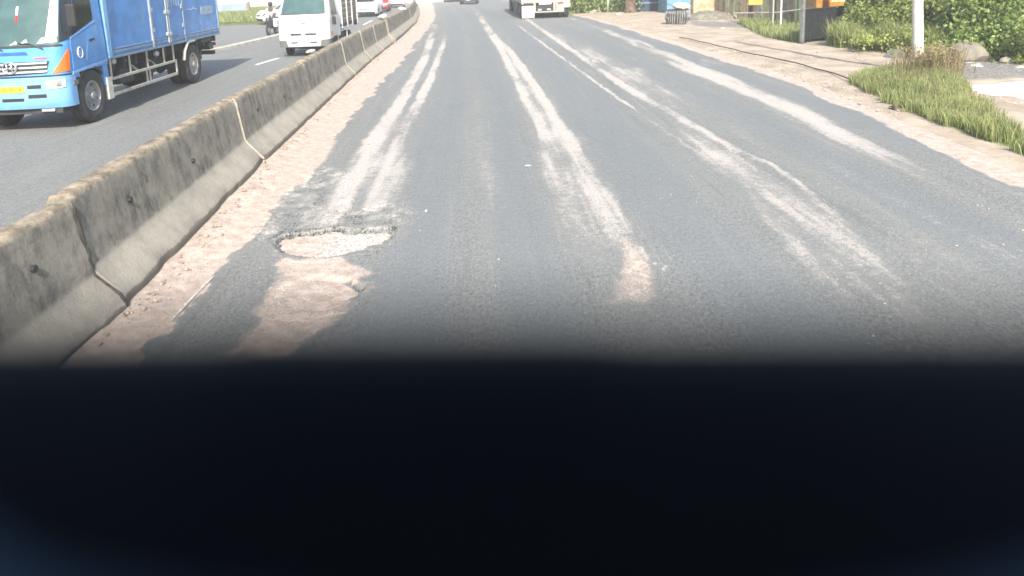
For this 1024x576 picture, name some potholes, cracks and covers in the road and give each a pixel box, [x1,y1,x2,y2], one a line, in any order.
pothole [250,164,421,264]
